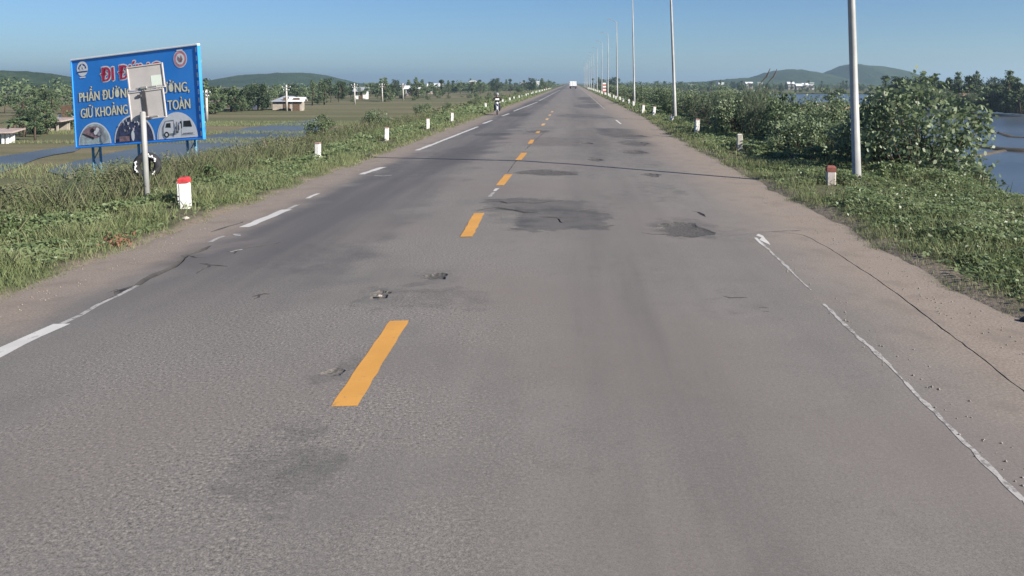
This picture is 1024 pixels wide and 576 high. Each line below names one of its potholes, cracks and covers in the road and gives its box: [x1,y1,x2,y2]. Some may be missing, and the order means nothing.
crack [99,222,280,303]
pothole [369,290,392,300]
pothole [319,368,346,377]
